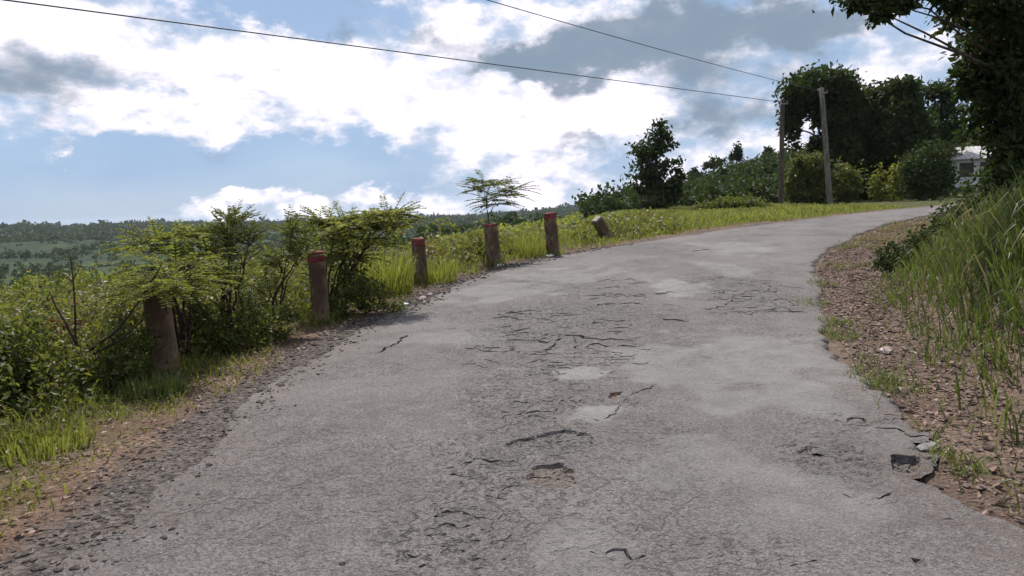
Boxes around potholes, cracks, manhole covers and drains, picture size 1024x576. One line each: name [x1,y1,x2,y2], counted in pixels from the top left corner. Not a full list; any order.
crack [590,542,647,566]
pothole [520,461,584,494]
crack [800,411,939,506]
crack [457,276,812,425]
pothole [881,452,934,479]
crack [371,334,413,355]
crack [406,455,526,576]
